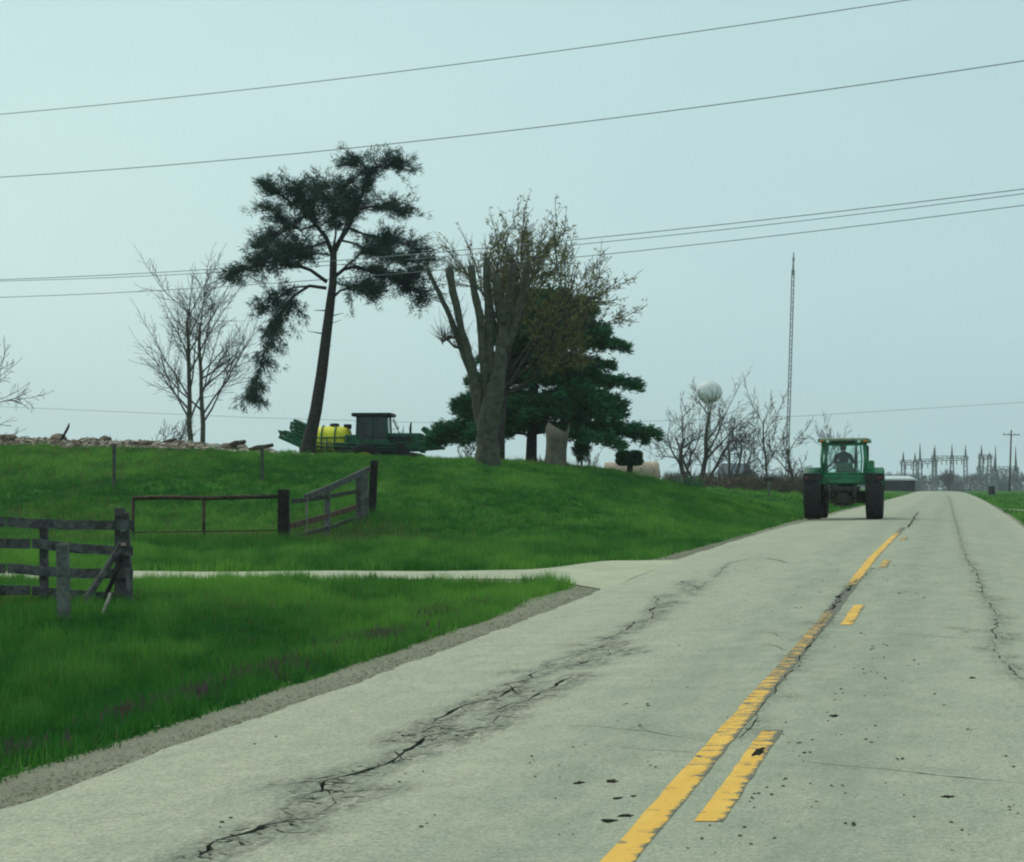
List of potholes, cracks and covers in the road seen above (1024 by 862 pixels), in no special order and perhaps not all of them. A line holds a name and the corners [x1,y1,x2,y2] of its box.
crack [182,630,646,859]
crack [739,568,877,738]
crack [593,726,696,752]
crack [949,498,1023,679]
crack [626,561,737,634]
